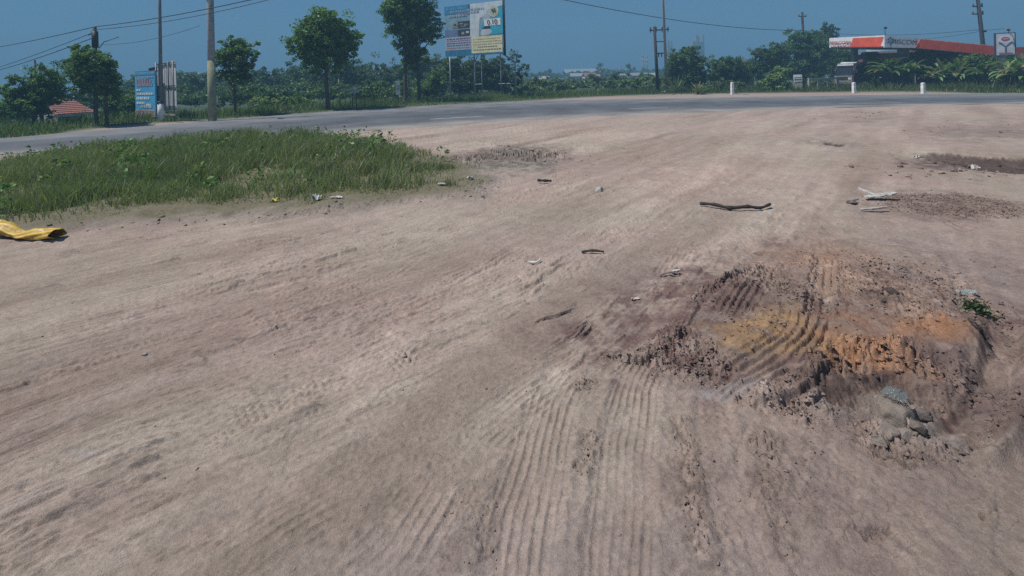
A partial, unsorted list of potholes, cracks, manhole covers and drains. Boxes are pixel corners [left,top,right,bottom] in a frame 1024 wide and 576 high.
pothole [766,320,1024,463]
pothole [890,148,1024,179]
